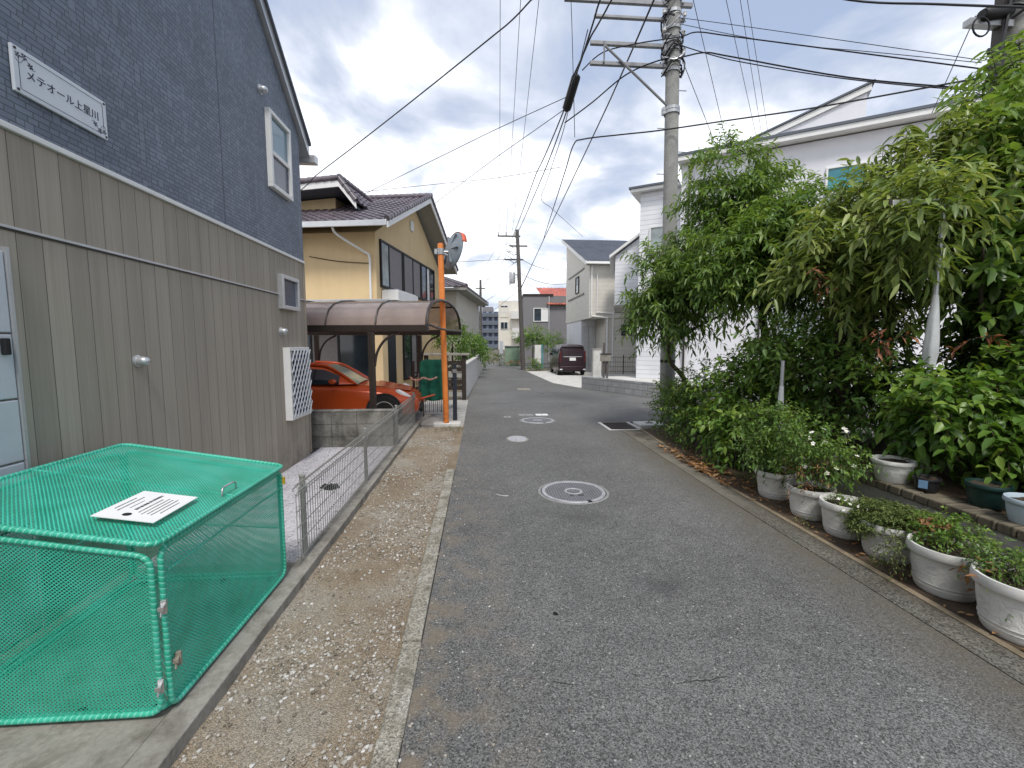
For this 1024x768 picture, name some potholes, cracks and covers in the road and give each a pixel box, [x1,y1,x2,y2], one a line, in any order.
drain grate [597,422,641,430]
manhole cover [538,481,609,505]
